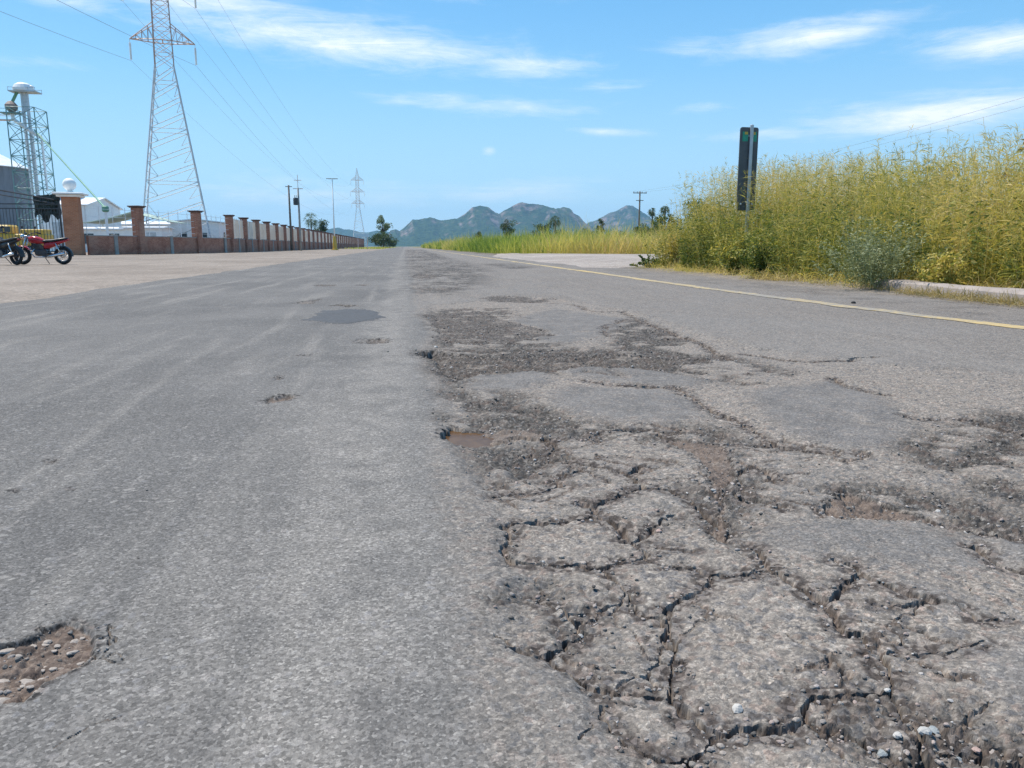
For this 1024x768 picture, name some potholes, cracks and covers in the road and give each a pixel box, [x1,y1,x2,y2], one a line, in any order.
crack [549,303,892,396]
crack [483,380,1024,768]
pothole [260,394,301,404]
pothole [479,295,560,303]
pothole [0,620,99,706]
pothole [434,425,552,449]
